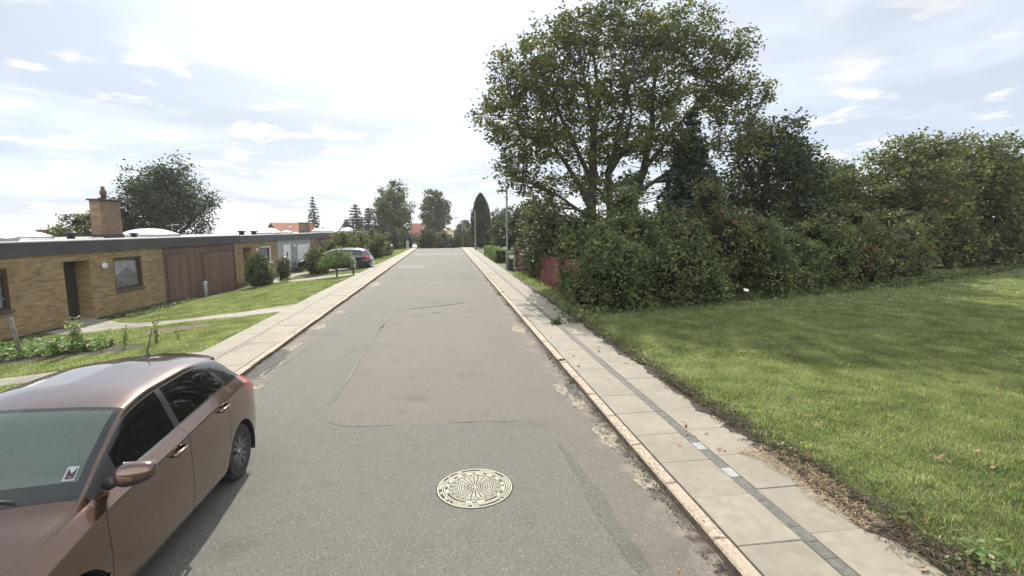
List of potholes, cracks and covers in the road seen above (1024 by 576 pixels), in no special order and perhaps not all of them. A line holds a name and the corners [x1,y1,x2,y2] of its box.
manhole cover [436,469,513,509]
